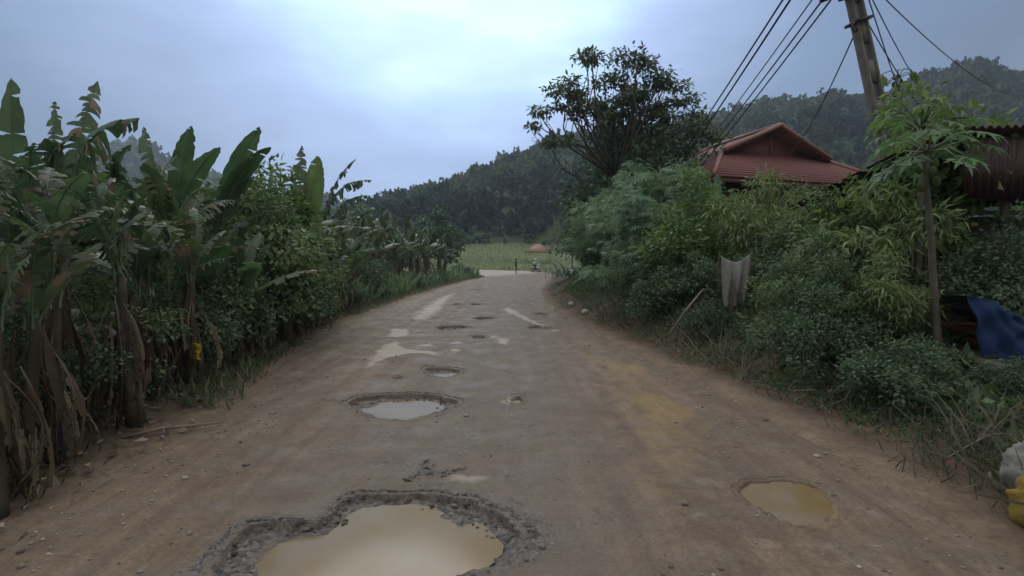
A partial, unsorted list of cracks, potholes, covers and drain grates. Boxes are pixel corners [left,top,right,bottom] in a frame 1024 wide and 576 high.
pothole [338,391,469,423]
pothole [188,488,541,576]
pothole [724,474,849,534]
pothole [419,365,467,379]
crack [403,459,467,482]
